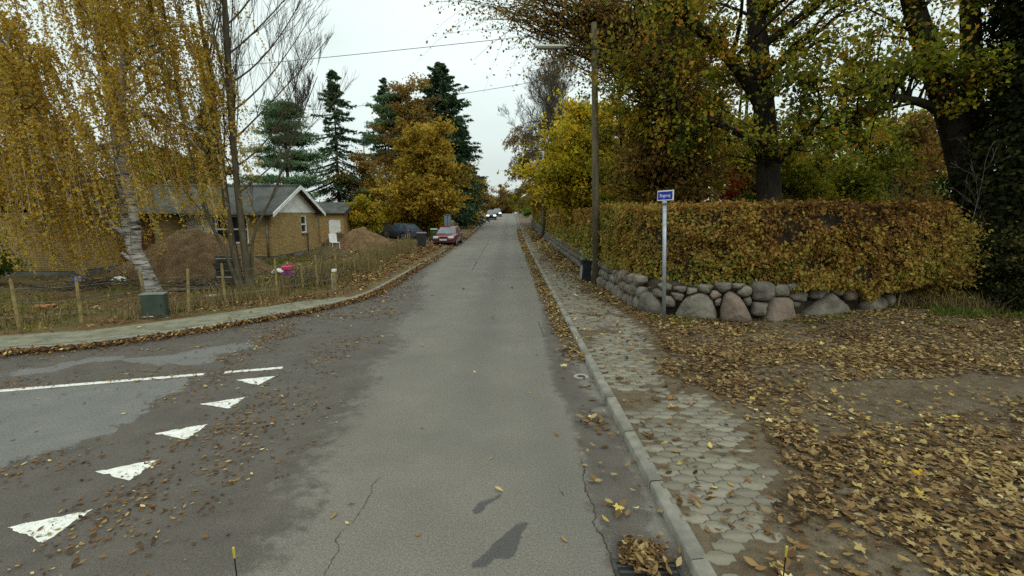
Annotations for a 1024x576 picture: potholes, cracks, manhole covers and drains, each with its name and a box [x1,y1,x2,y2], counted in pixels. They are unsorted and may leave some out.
drain grate [611,558,685,576]
crack [324,480,377,575]
crack [581,461,614,572]
